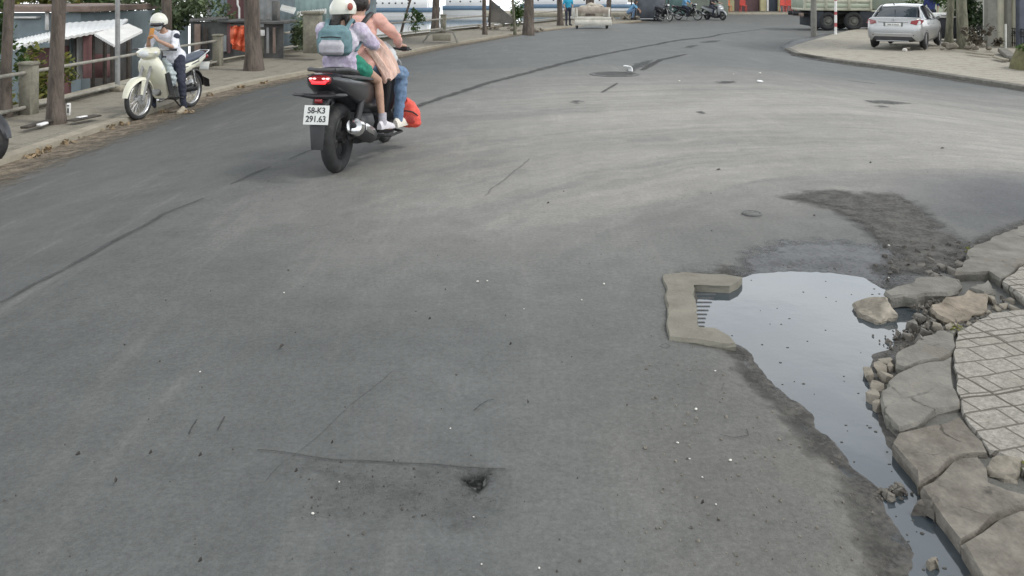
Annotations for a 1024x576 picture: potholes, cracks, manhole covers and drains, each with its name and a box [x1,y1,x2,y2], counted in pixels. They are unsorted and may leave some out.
pothole [694,265,972,576]
pothole [462,476,487,492]
